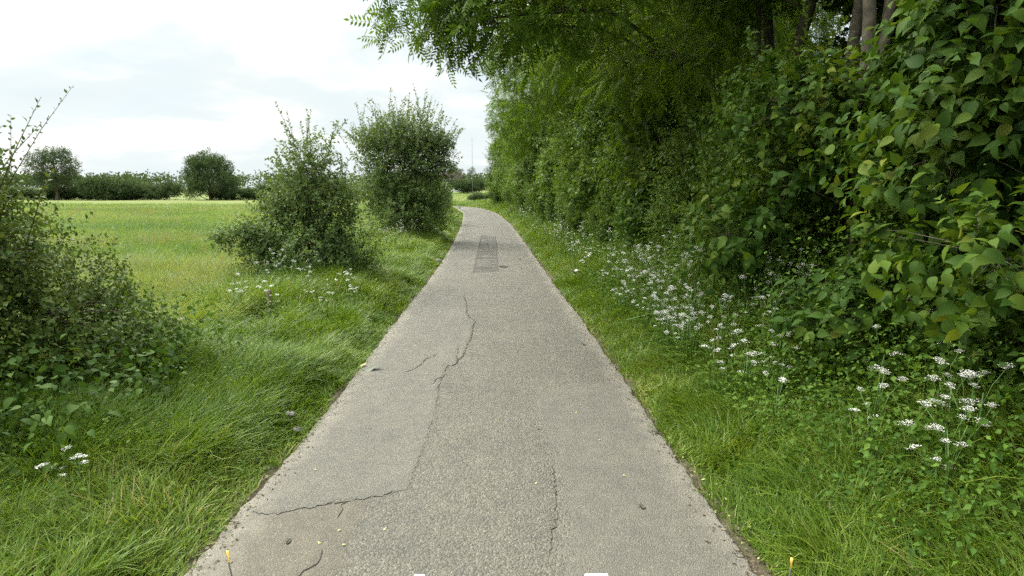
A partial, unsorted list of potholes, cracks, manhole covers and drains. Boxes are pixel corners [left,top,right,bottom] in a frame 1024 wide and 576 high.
crack [393,297,475,493]
